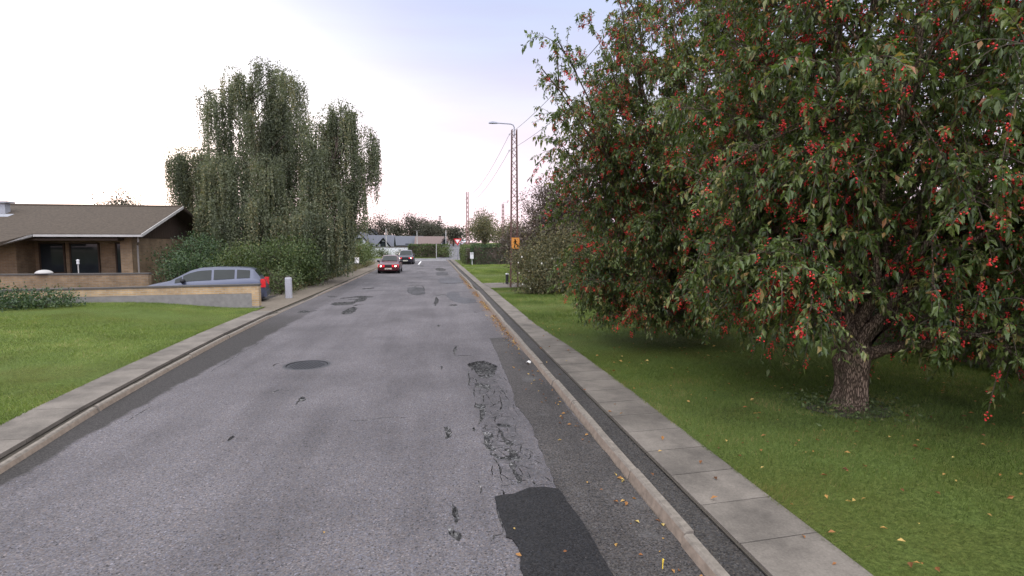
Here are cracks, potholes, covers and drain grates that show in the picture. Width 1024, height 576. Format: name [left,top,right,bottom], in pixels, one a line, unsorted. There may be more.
crack [453,346,554,541]
pothole [467,361,498,375]
pothole [448,526,463,541]
manhole cover [282,360,331,370]
pothole [331,296,373,305]
